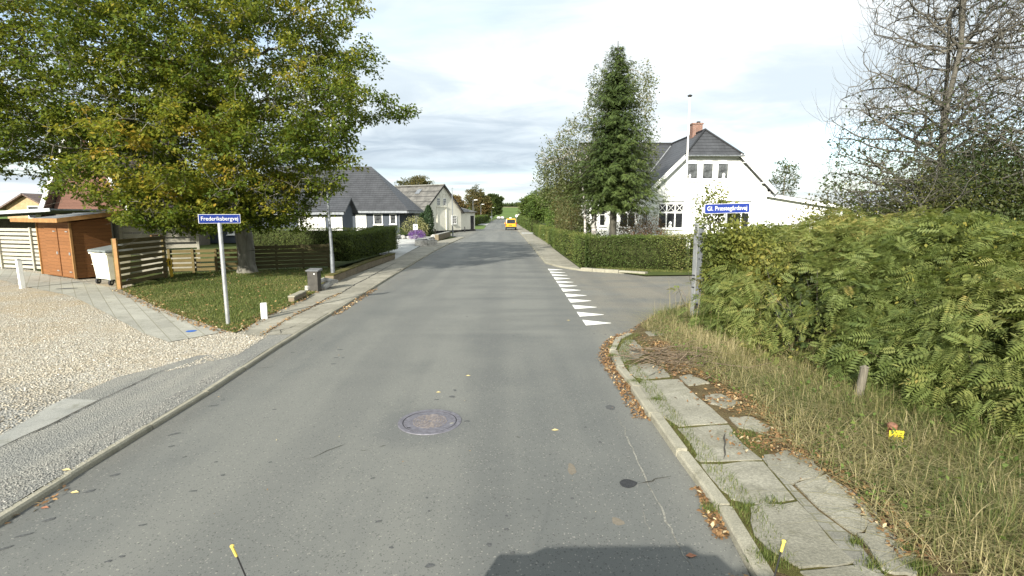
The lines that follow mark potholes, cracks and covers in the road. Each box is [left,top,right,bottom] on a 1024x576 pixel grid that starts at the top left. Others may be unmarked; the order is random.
crack [618,417,696,571]
manhole cover [398,409,462,435]
